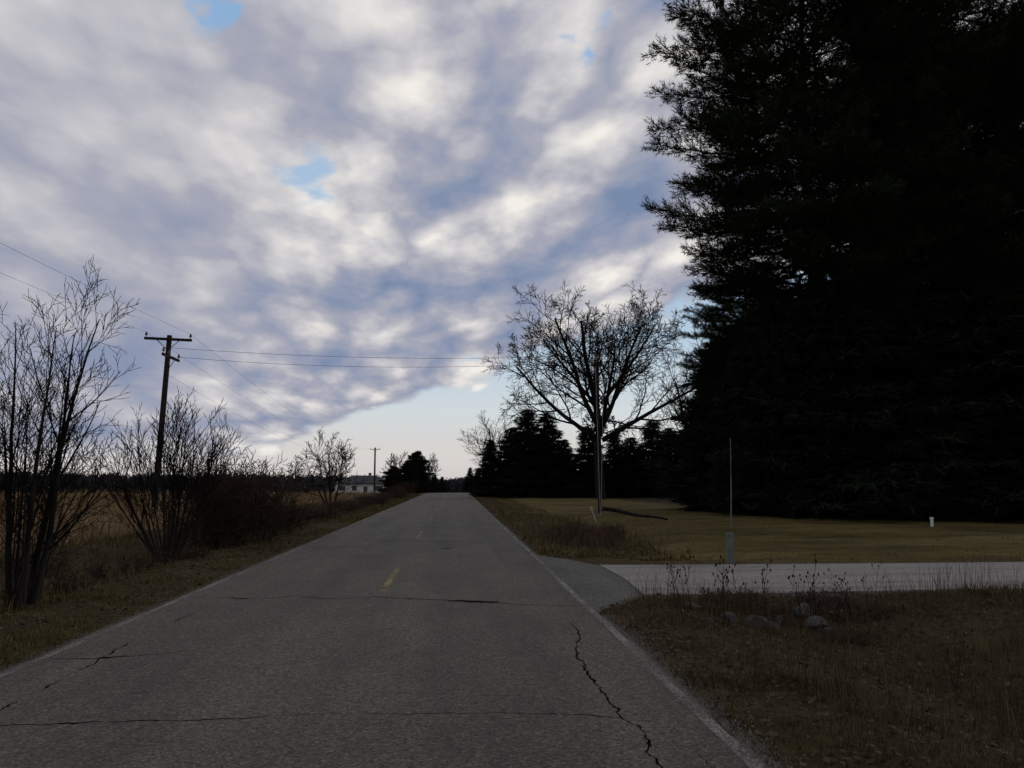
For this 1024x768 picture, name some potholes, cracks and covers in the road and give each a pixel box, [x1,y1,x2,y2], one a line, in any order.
crack [156,596,583,631]
crack [0,623,663,768]
